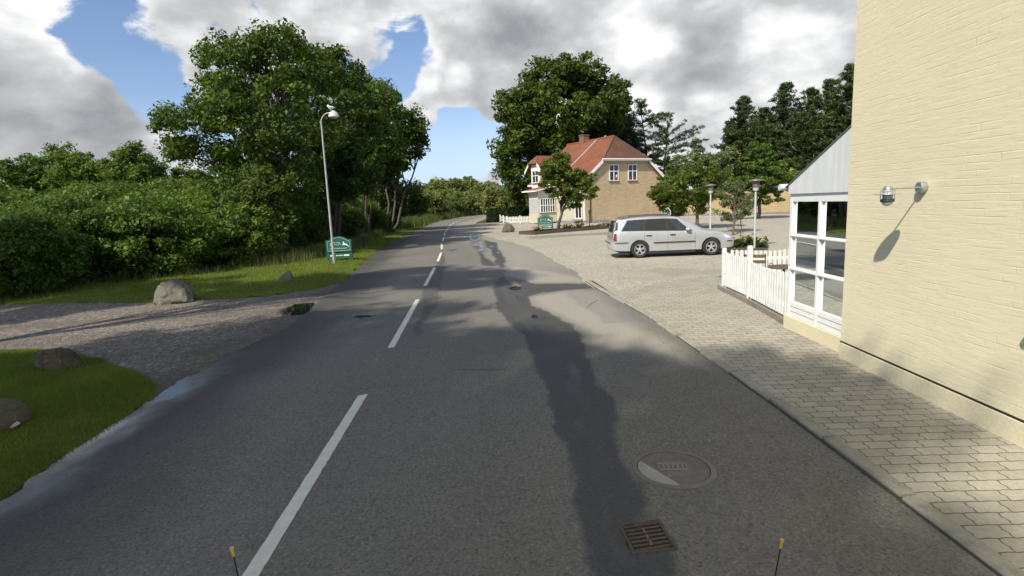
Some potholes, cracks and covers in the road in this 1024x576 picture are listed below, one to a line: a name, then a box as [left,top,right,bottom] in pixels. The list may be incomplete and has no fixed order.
pothole [282,302,315,315]
manhole cover [632,450,717,489]
drain grate [617,518,679,555]
